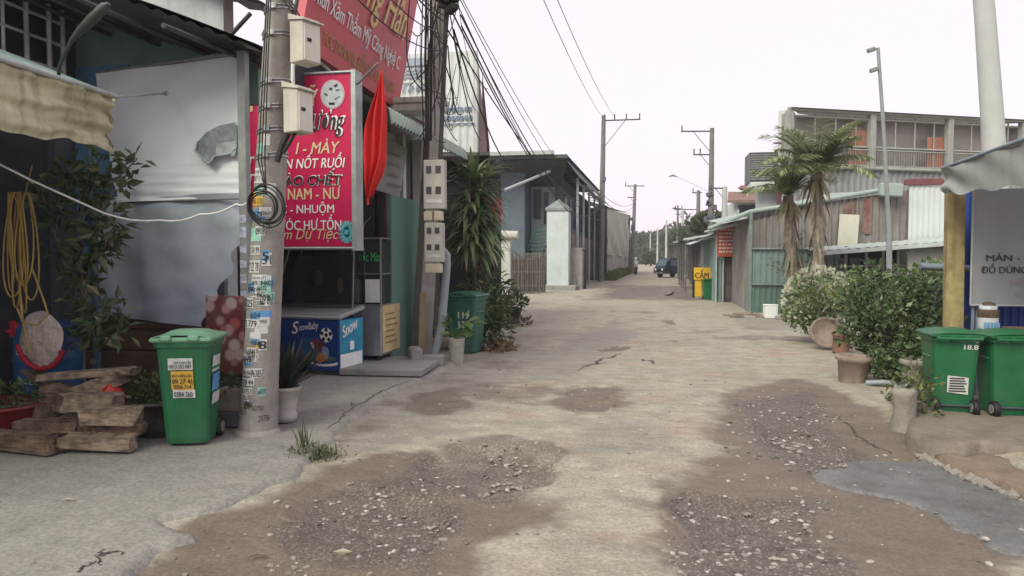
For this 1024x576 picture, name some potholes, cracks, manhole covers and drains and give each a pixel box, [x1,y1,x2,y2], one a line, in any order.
crack [328,382,405,428]
pothole [395,441,570,502]
crack [77,549,123,572]
pothole [659,486,822,562]
pothole [753,417,859,469]
crack [838,418,892,453]
pothole [277,480,468,560]
